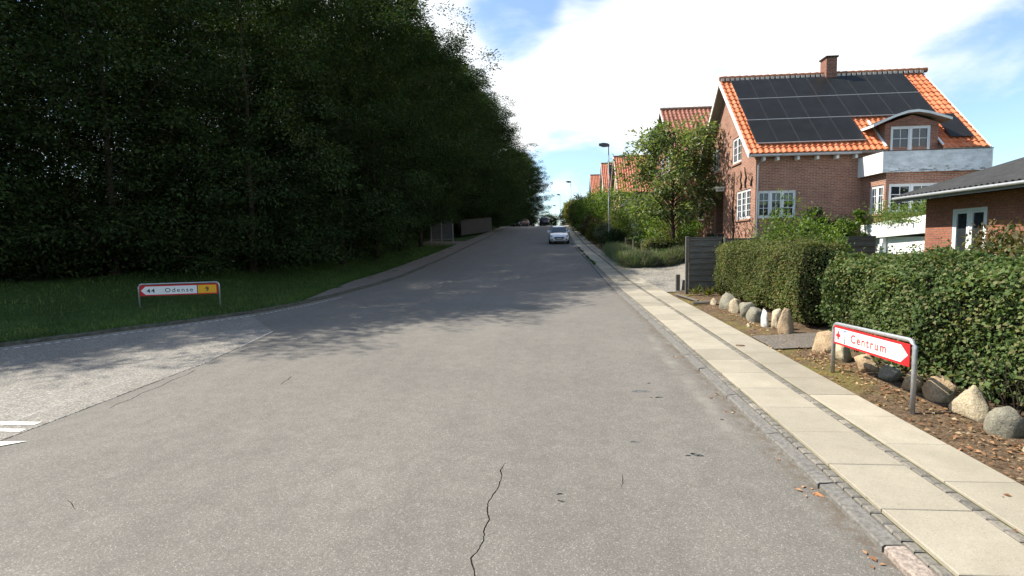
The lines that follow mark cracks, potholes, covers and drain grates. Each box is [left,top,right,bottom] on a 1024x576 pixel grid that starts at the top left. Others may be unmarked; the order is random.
crack [470,462,506,576]
